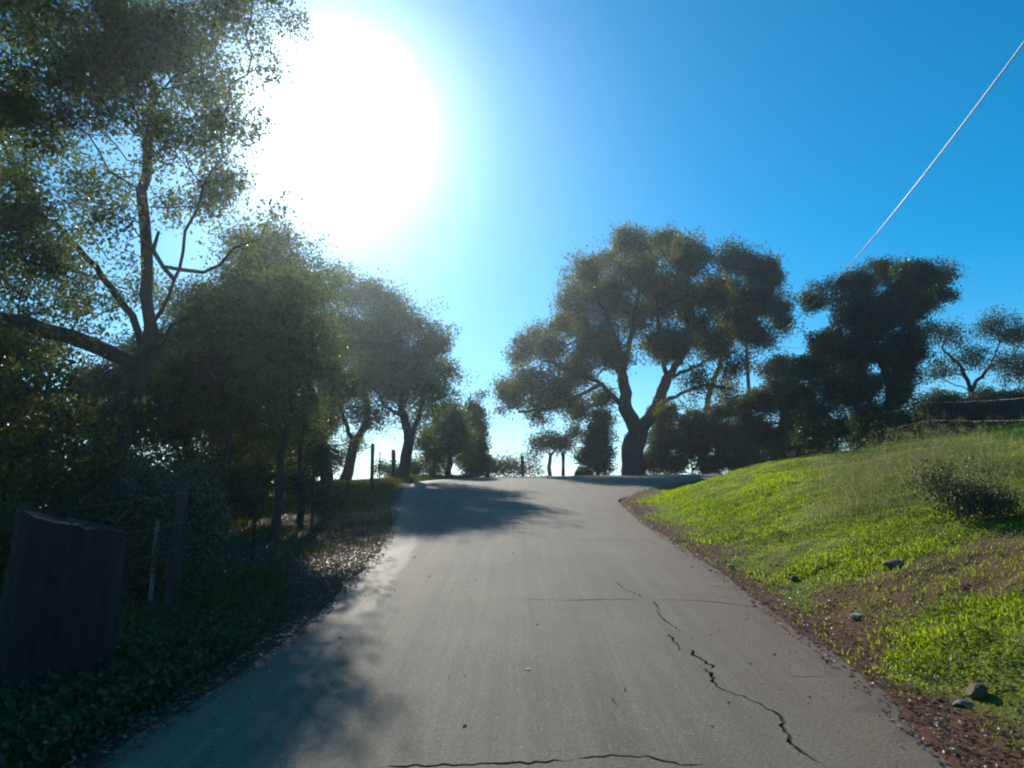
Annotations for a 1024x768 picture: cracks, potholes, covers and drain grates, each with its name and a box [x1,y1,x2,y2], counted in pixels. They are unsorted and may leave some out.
crack [385,755,705,768]
crack [533,582,826,767]
